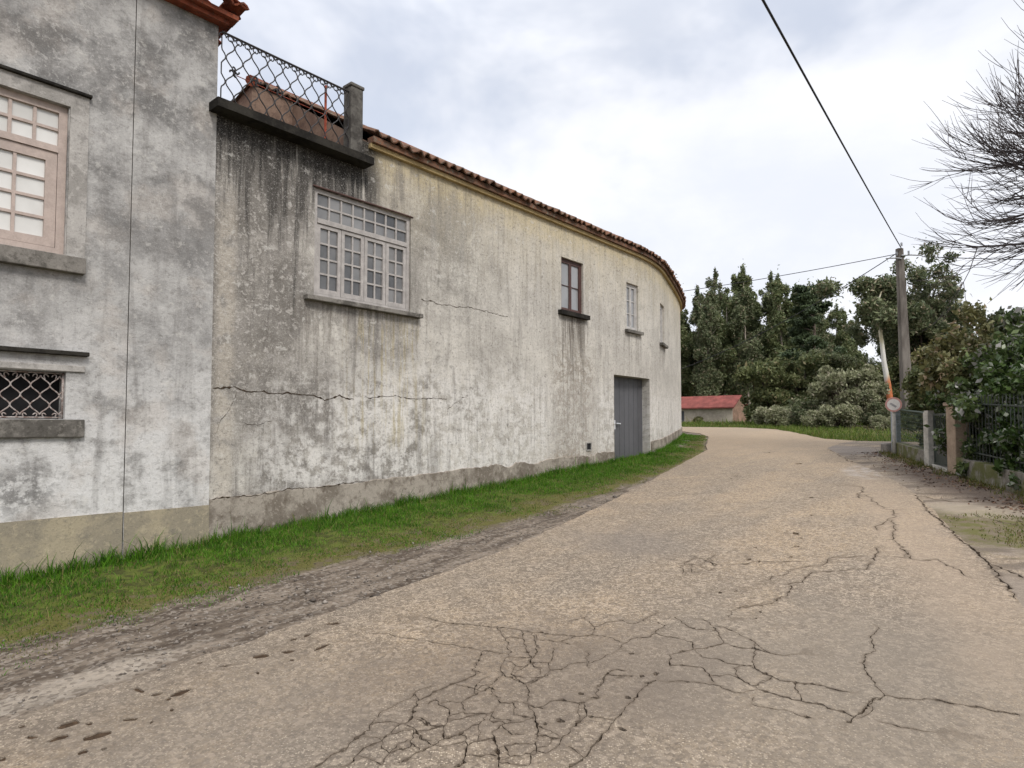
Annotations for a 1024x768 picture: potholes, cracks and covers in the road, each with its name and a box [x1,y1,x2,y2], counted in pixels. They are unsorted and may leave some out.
pothole [84,732,111,741]
crack [669,622,976,723]
crack [342,636,638,768]
